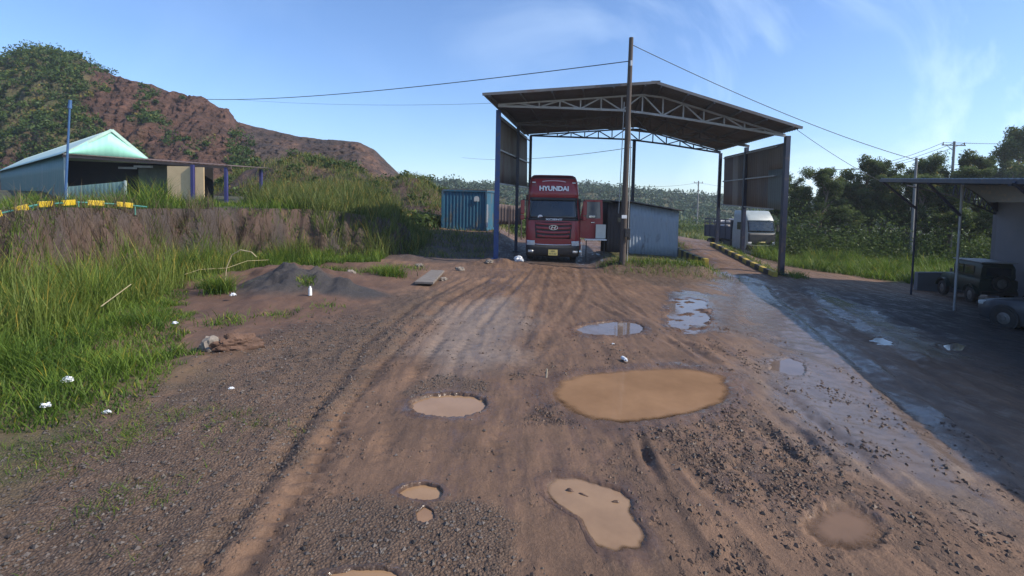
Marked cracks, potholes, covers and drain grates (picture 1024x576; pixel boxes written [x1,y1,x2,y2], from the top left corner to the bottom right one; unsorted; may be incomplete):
pothole [534,470,659,562]
pothole [567,319,651,337]
pothole [401,390,497,420]
pothole [314,562,414,576]
pothole [388,479,452,503]
pothole [535,364,746,429]
pothole [409,502,442,529]
